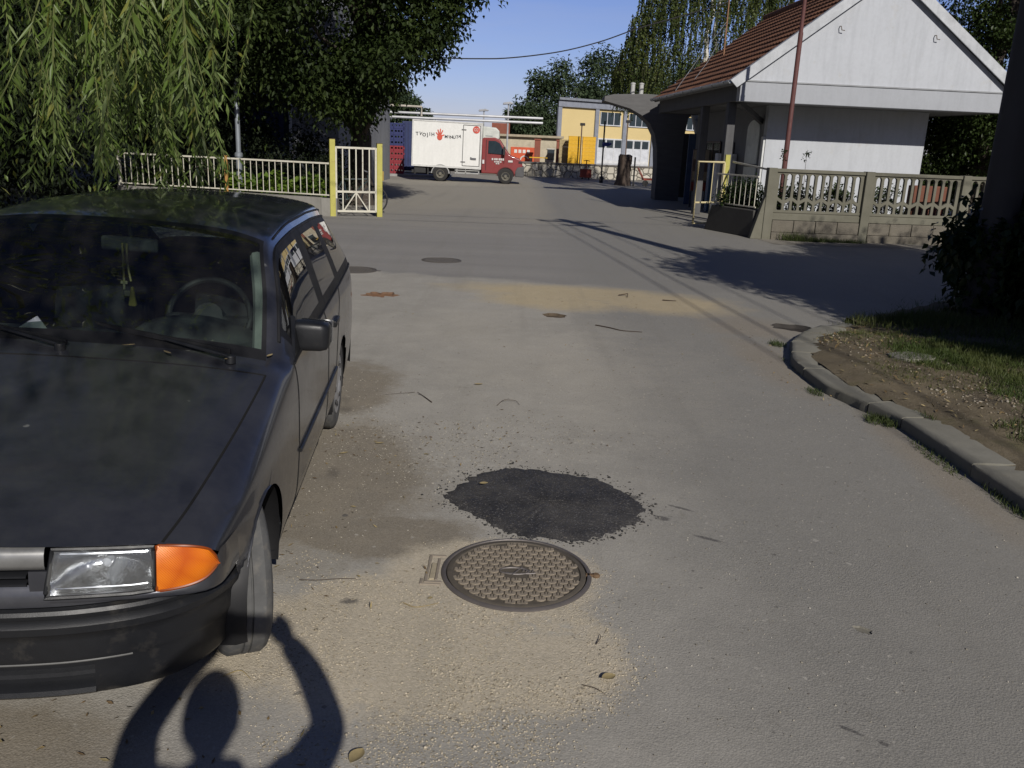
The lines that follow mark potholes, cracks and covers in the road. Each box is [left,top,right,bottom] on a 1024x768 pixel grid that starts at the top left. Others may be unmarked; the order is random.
manhole cover [419,538,600,612]
